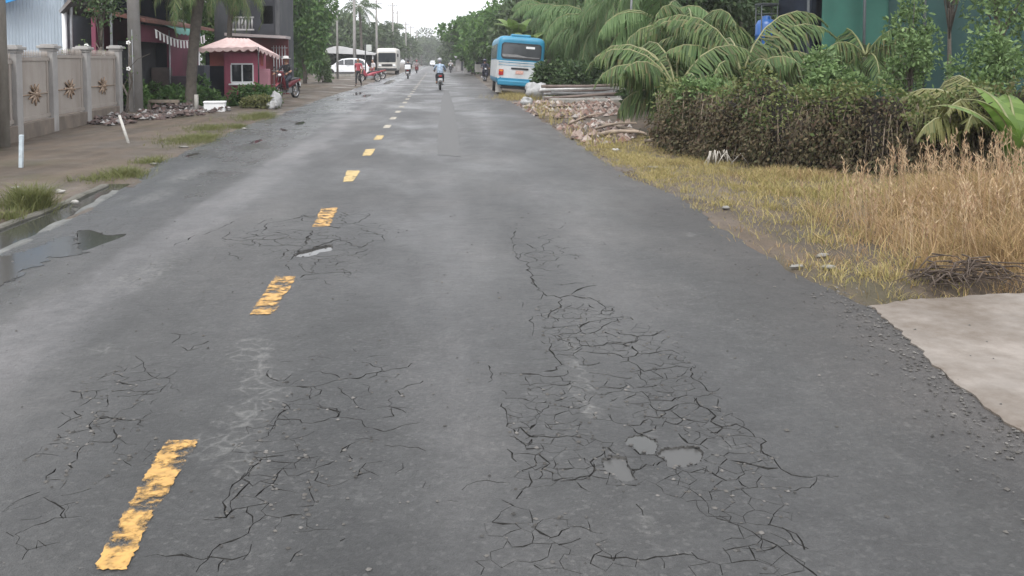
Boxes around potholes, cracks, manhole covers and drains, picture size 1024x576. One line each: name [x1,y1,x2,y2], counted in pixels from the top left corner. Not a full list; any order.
pothole [656,445,704,468]
crack [223,211,406,283]
pothole [601,454,637,482]
pothole [625,432,659,455]
crack [423,225,837,576]
crack [145,334,425,572]
pothole [293,244,333,257]
crack [6,358,179,560]
